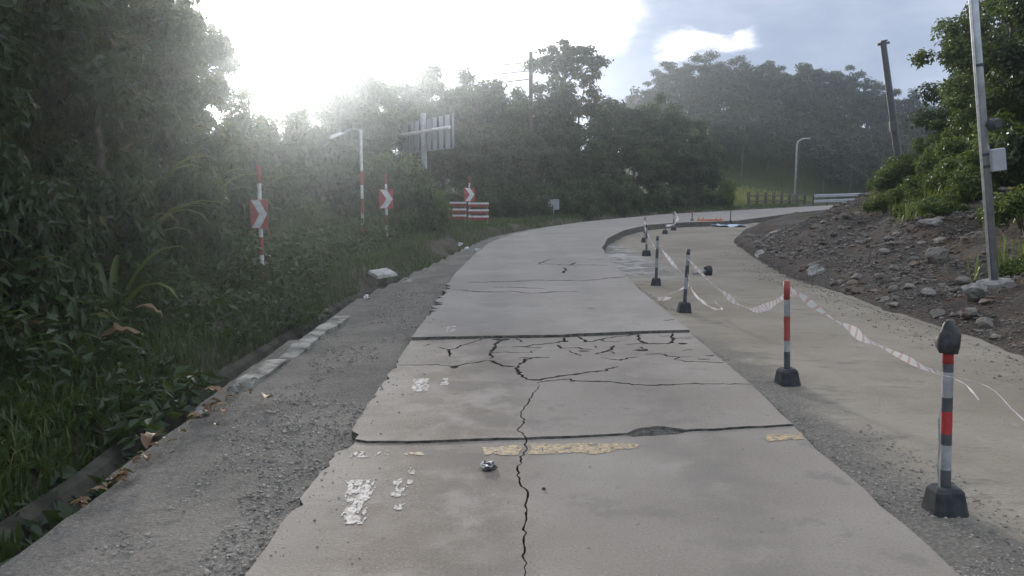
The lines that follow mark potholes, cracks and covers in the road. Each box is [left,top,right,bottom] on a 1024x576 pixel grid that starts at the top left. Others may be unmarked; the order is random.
crack [423,333,737,576]
crack [464,259,618,293]
pothole [623,426,686,437]
